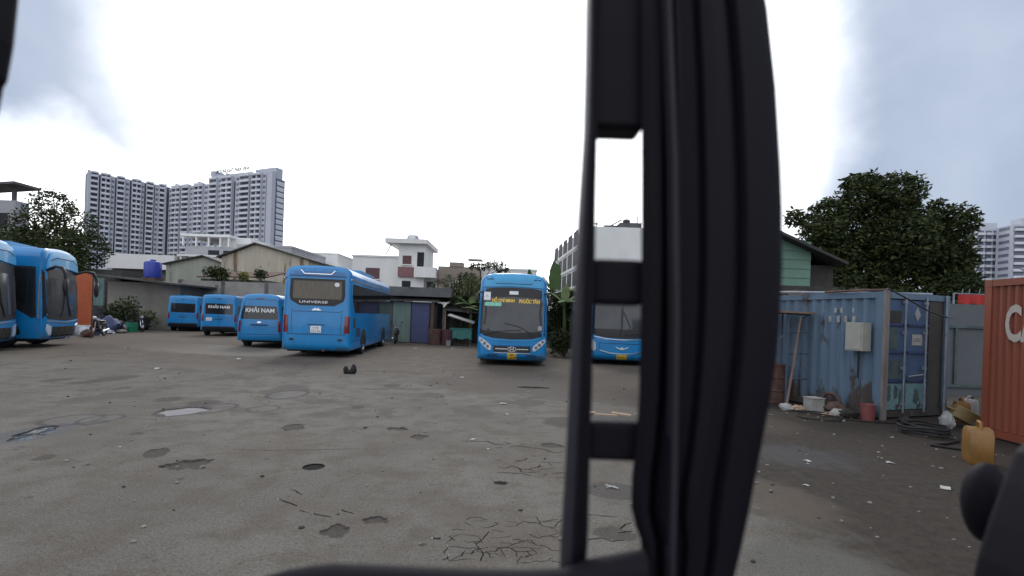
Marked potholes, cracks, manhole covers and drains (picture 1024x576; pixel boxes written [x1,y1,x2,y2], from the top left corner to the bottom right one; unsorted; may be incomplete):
pothole [142,448,170,458]
pothole [6,425,60,442]
pothole [362,516,389,524]
pothole [158,458,215,471]
pothole [319,523,351,538]
crack [470,441,565,478]
crack [279,489,354,517]
crack [433,516,562,563]
